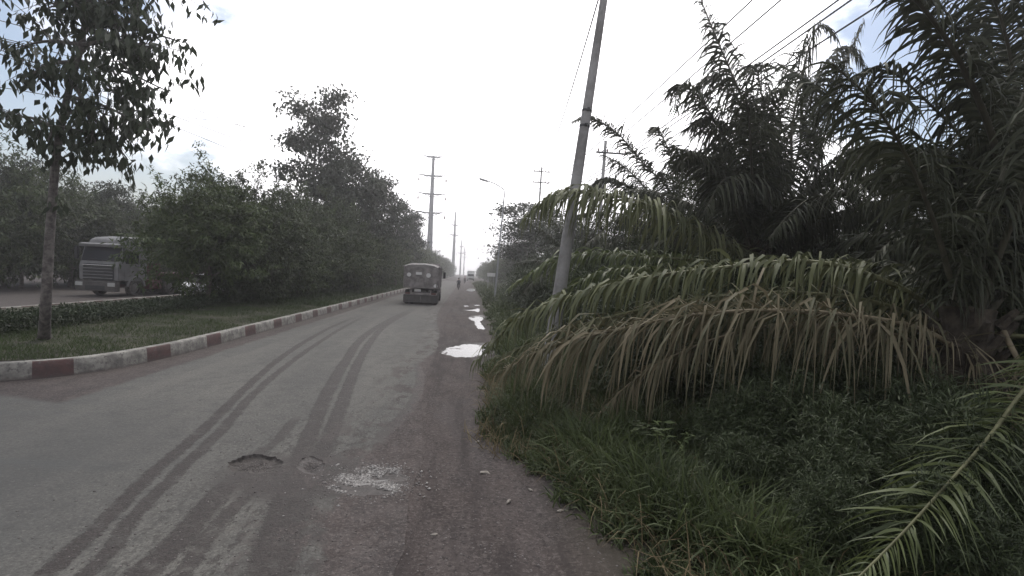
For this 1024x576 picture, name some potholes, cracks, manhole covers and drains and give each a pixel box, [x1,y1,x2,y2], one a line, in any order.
pothole [227,454,284,474]
